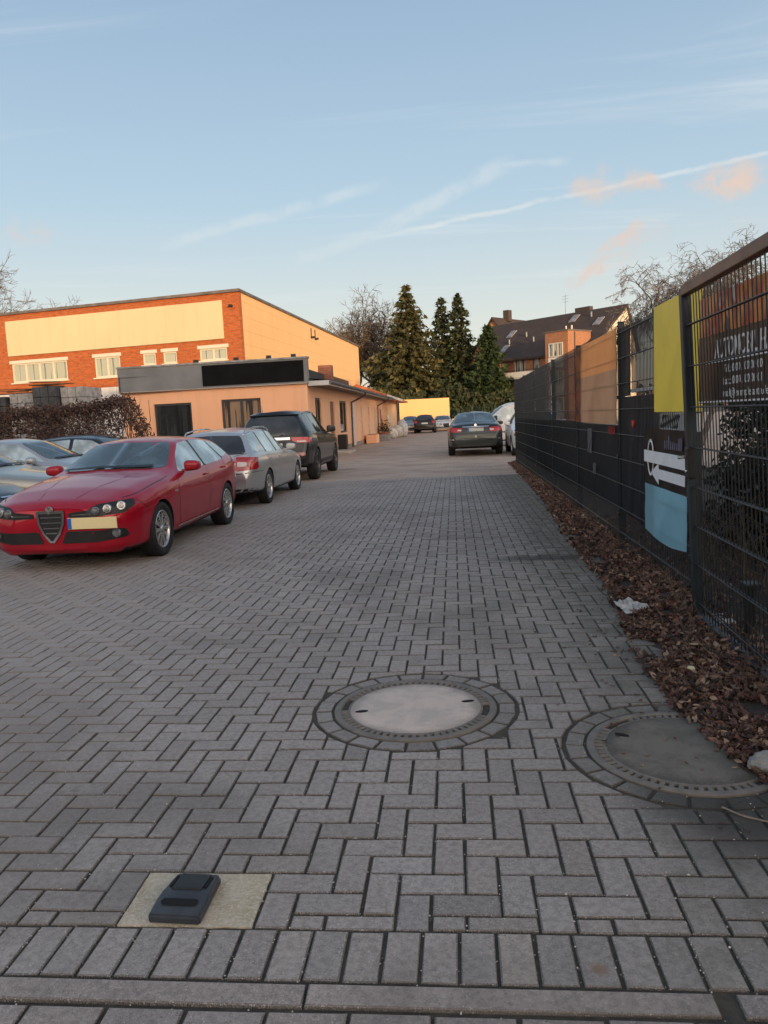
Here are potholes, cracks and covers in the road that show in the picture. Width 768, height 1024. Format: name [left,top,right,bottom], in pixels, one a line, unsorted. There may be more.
manhole cover [335,679,497,743]
manhole cover [587,712,768,798]
